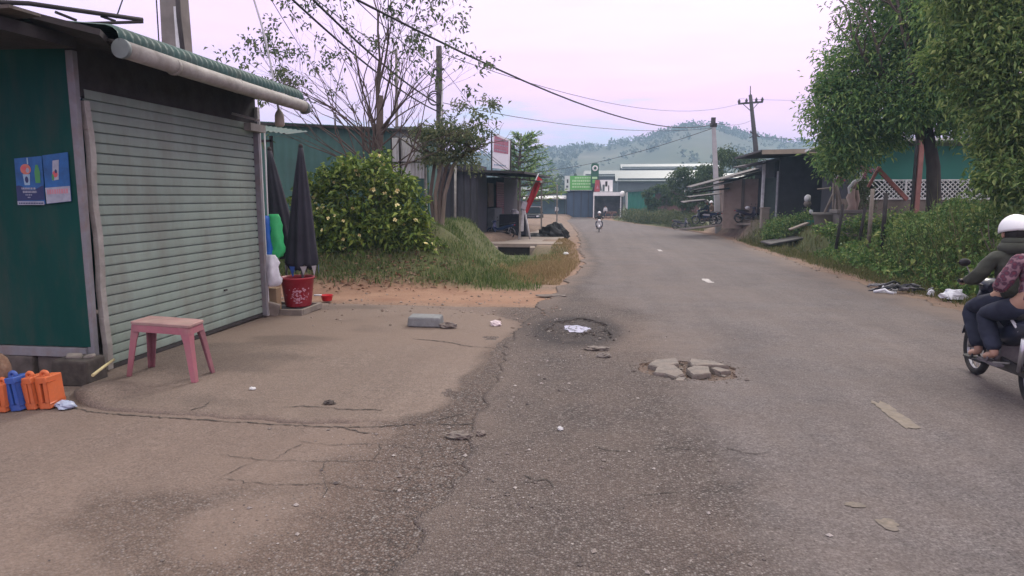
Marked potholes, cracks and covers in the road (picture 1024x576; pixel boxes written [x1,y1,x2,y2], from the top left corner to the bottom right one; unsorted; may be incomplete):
crack [74,402,473,498]
pothole [545,318,612,343]
pothole [638,361,737,381]
